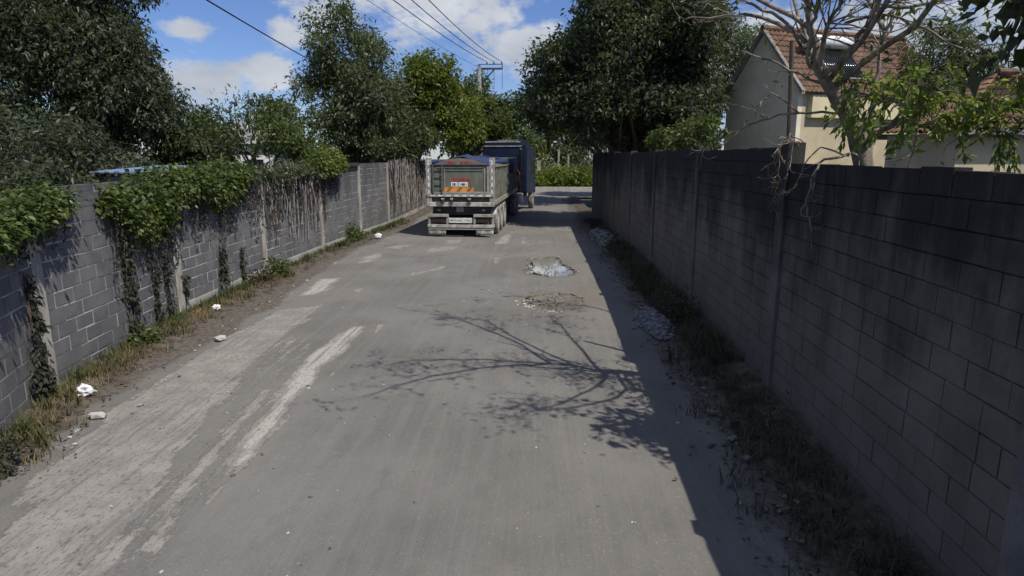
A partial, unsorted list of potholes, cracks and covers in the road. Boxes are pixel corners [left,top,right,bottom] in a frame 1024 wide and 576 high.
pothole [522,256,580,278]
pothole [516,292,586,313]
